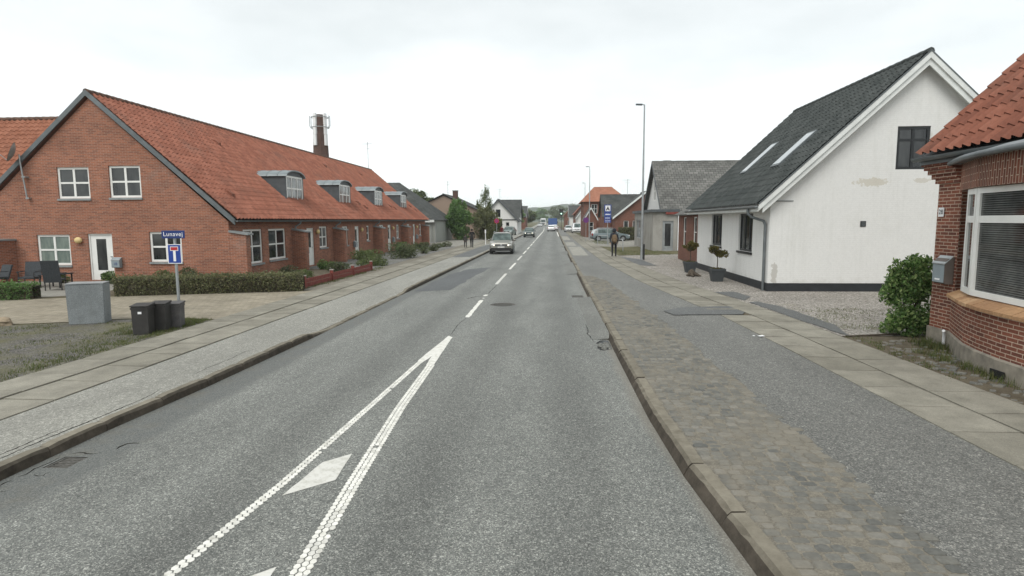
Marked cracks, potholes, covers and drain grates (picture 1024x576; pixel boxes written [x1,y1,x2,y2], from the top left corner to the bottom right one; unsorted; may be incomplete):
crack [0,443,132,492]
drain grate [44,457,86,468]
pothole [597,340,612,351]
